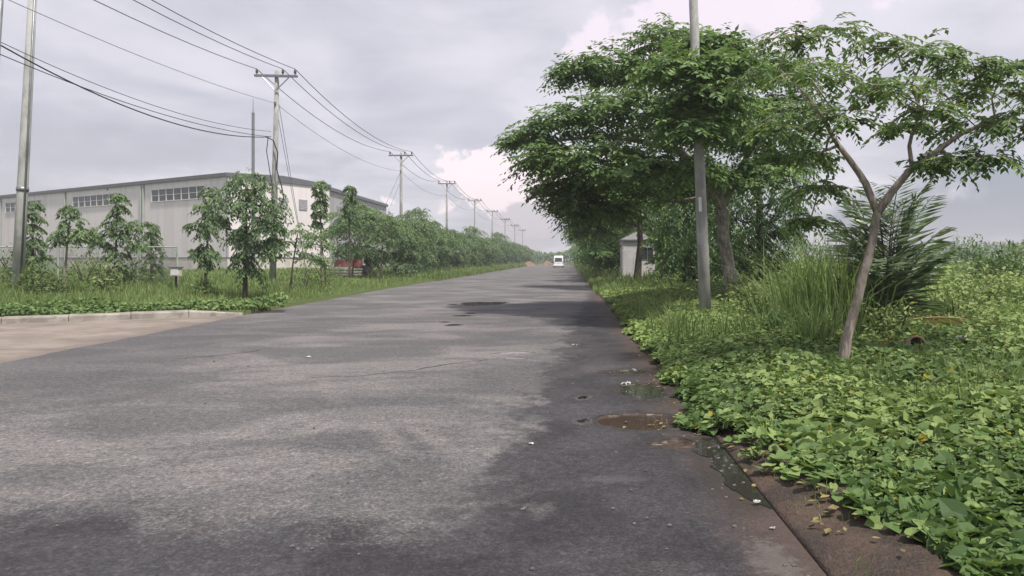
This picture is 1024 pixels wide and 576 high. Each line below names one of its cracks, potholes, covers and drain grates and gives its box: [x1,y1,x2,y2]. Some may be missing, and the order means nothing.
pothole [613,382,673,401]
pothole [641,437,724,452]
crack [312,359,488,378]
pothole [584,412,689,432]
